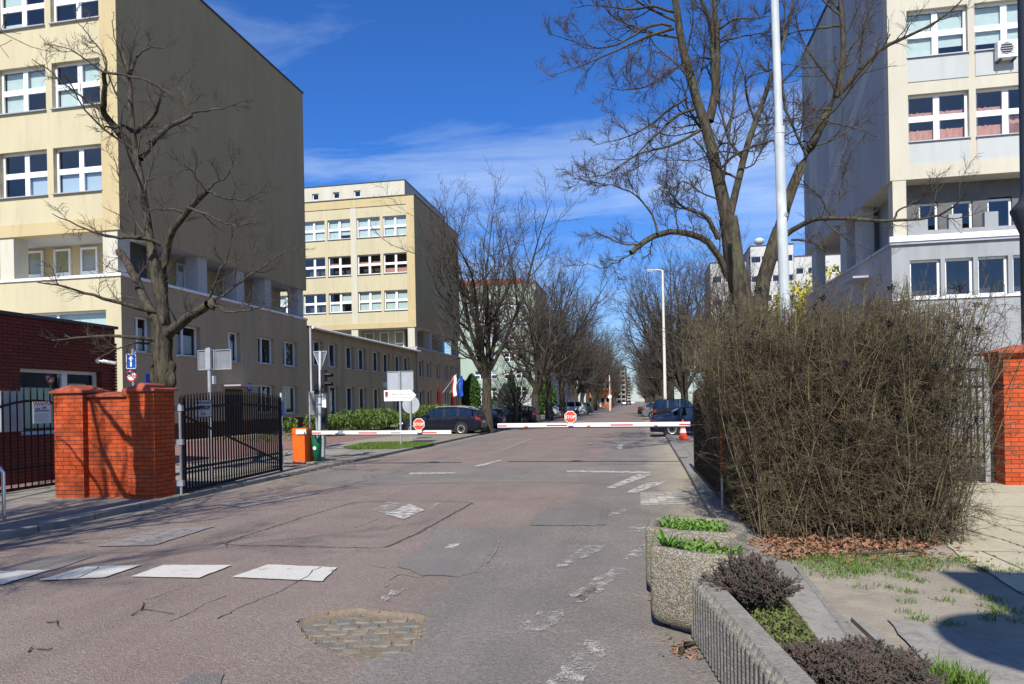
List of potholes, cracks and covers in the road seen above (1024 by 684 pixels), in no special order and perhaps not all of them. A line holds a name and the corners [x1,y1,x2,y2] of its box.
crack [374,565,421,586]
crack [141,567,320,621]
